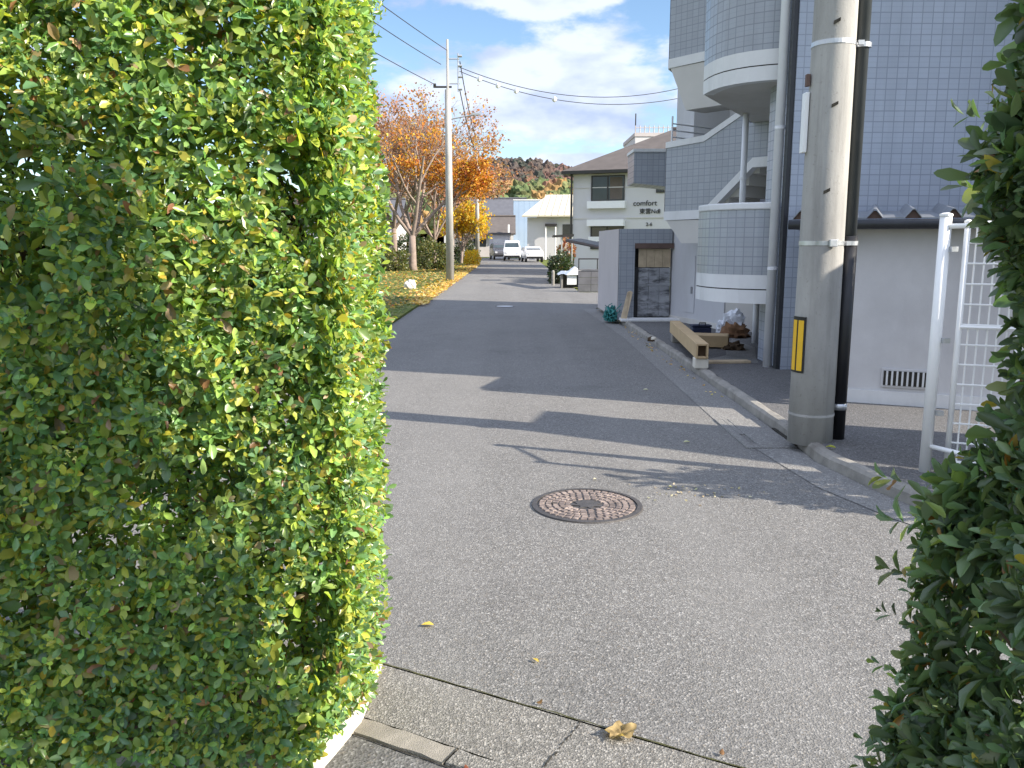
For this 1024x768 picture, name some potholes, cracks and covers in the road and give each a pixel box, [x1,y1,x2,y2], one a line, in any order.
manhole cover [532,488,643,524]
